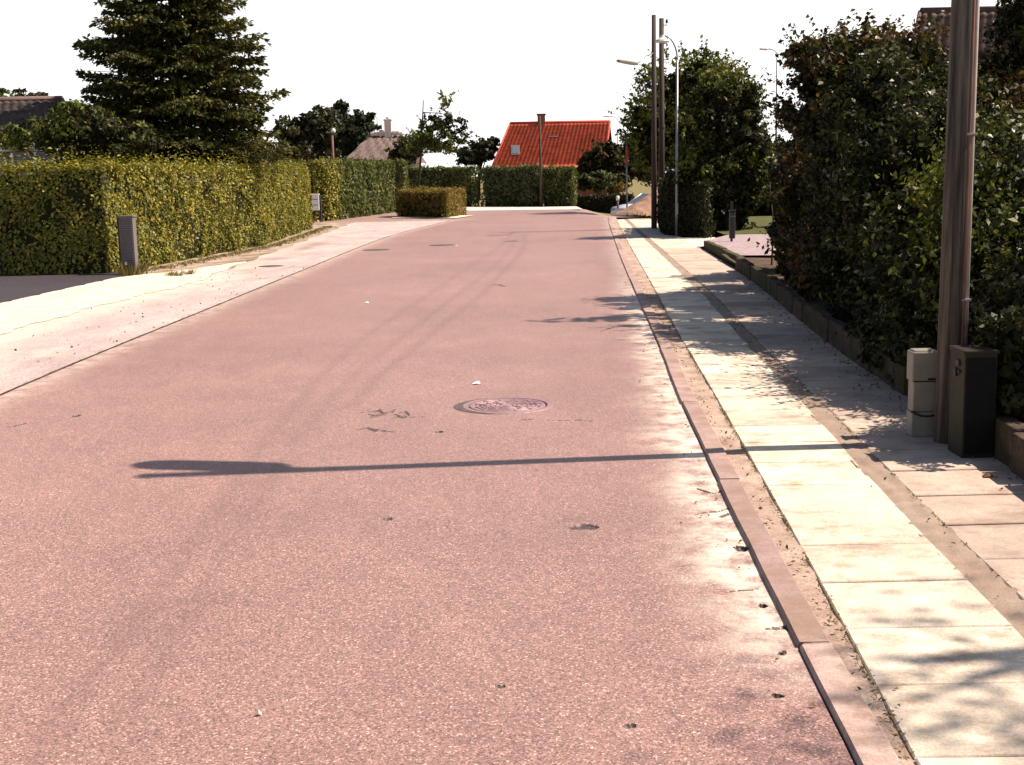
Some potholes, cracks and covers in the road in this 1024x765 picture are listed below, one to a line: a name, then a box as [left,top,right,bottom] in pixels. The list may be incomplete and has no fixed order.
manhole cover [462,397,553,414]
